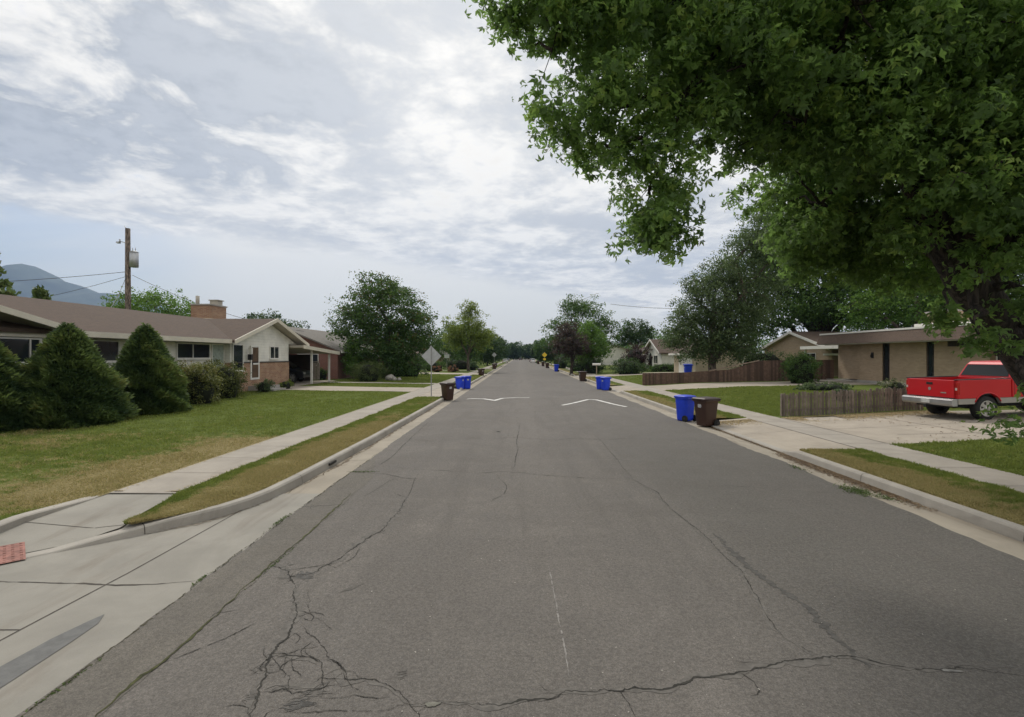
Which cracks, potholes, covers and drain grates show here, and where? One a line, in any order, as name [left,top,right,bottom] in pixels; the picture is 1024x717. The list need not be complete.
crack [158,426,1018,717]
